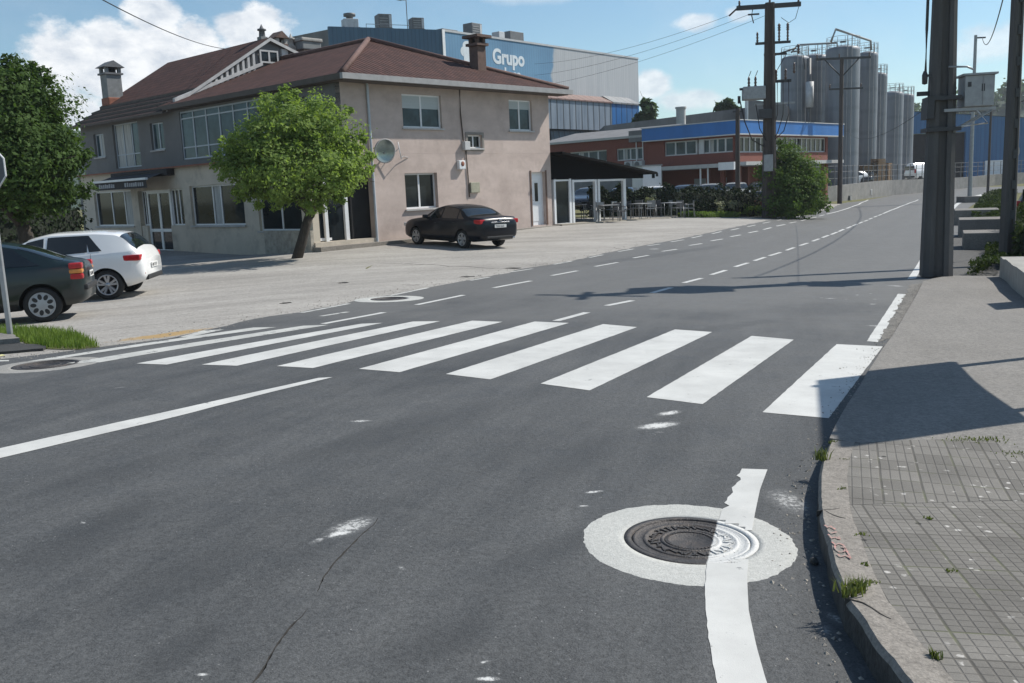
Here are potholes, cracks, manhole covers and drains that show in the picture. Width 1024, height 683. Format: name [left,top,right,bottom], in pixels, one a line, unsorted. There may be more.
manhole cover [0,357,97,373]
crack [252,518,378,683]
manhole cover [583,504,798,586]
